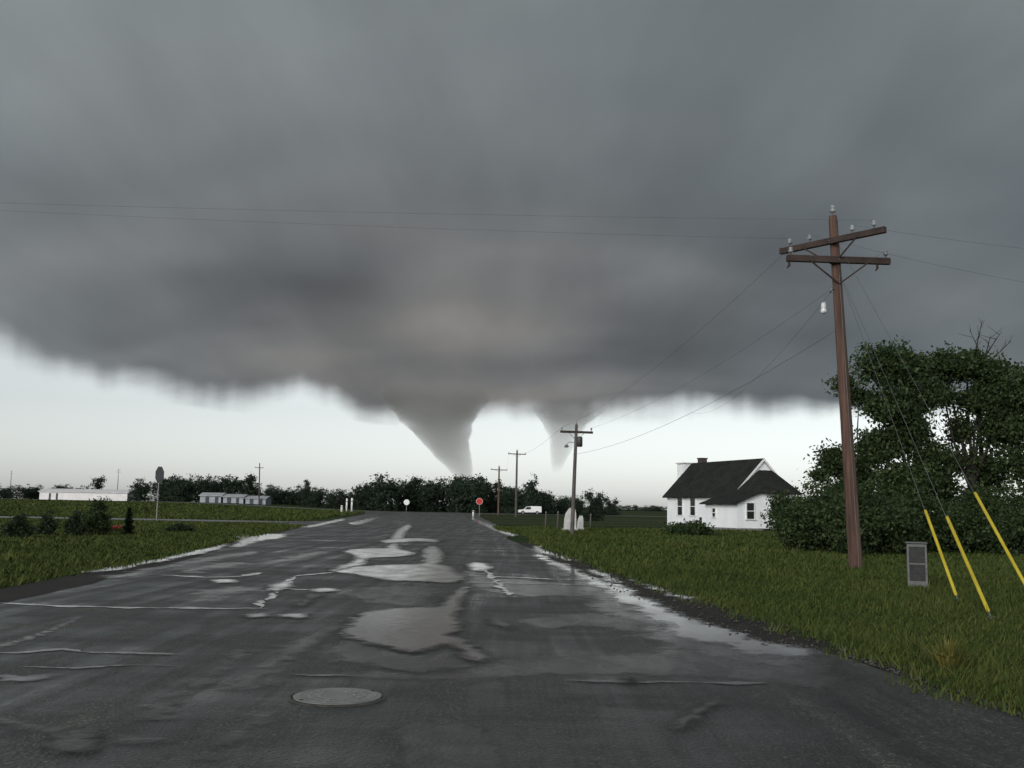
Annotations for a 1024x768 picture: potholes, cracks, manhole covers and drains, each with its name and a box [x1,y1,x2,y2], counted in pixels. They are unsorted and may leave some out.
manhole cover [287,688,387,707]
